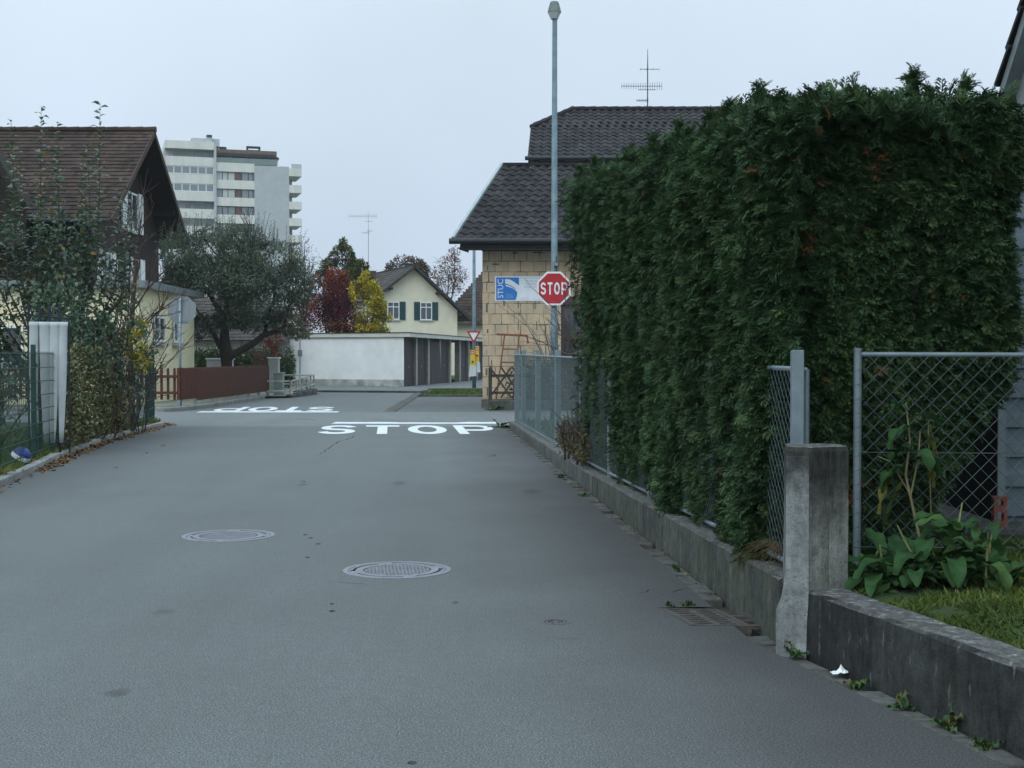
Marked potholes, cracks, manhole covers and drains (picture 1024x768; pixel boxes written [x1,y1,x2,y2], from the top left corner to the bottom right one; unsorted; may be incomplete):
drain grate [660,608,761,636]
manhole cover [181,529,275,542]
manhole cover [343,561,451,579]
